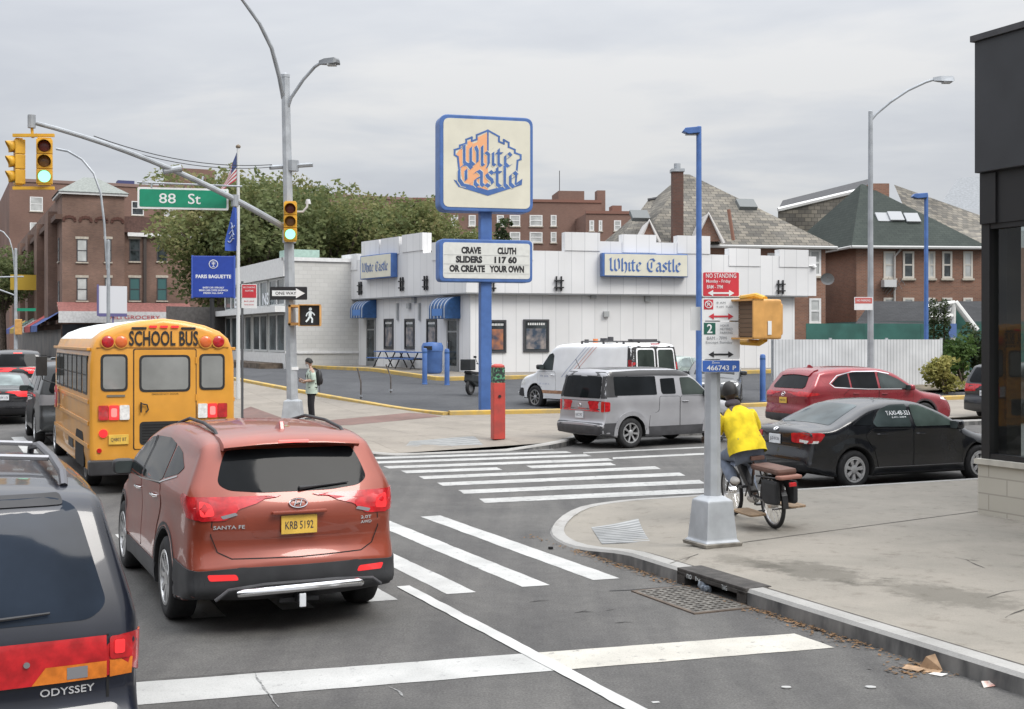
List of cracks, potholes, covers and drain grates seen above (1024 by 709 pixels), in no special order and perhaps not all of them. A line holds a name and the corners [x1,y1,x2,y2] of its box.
drain grate [631,565,772,615]
crack [142,668,292,707]
